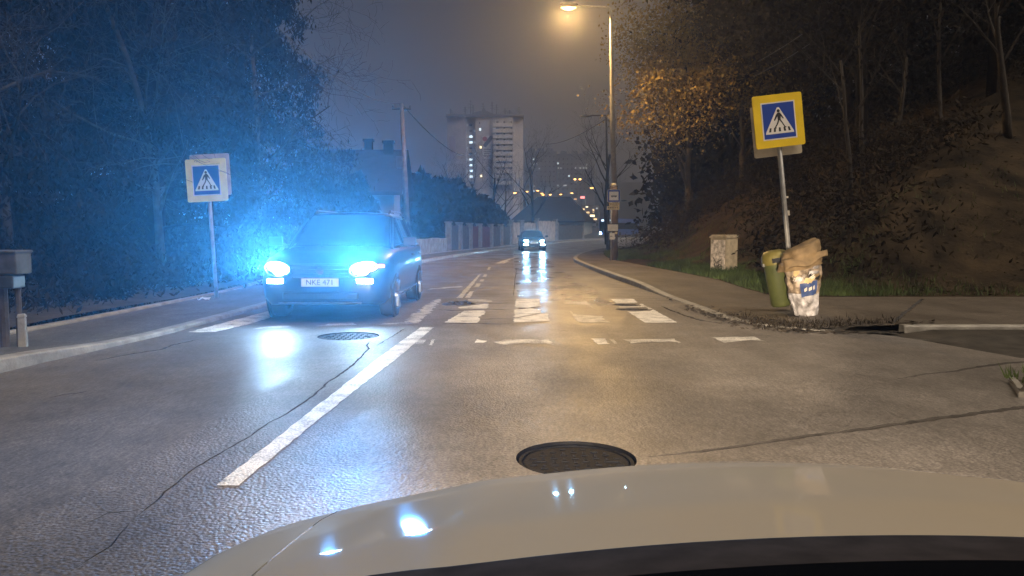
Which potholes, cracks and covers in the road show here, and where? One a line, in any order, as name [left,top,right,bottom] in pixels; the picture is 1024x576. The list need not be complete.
manhole cover [317,332,379,340]
crack [76,328,405,568]
manhole cover [516,441,637,474]
